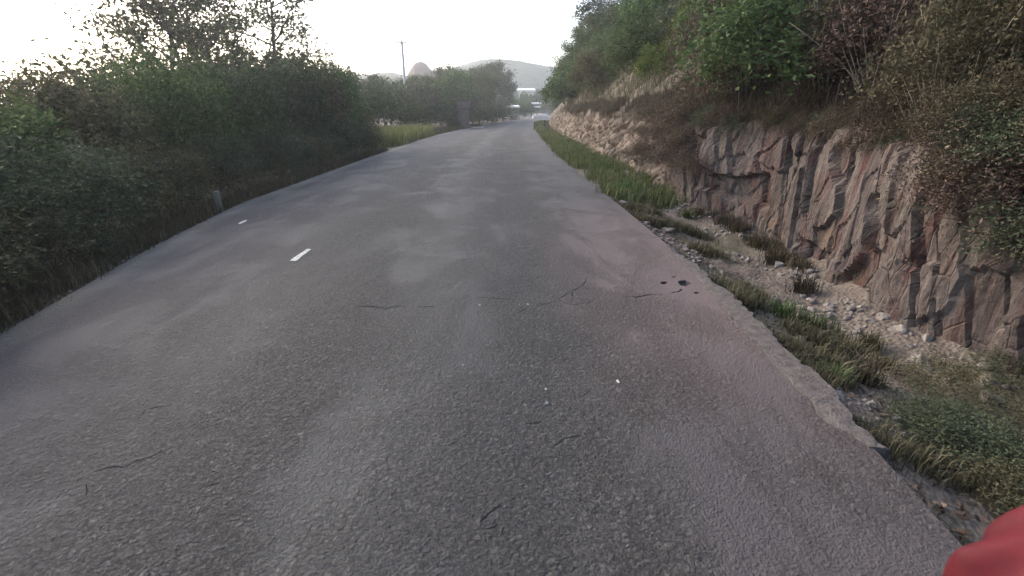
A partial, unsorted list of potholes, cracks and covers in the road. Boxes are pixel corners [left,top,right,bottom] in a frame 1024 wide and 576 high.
crack [85,450,166,497]
crack [480,503,507,538]
crack [518,278,593,313]
